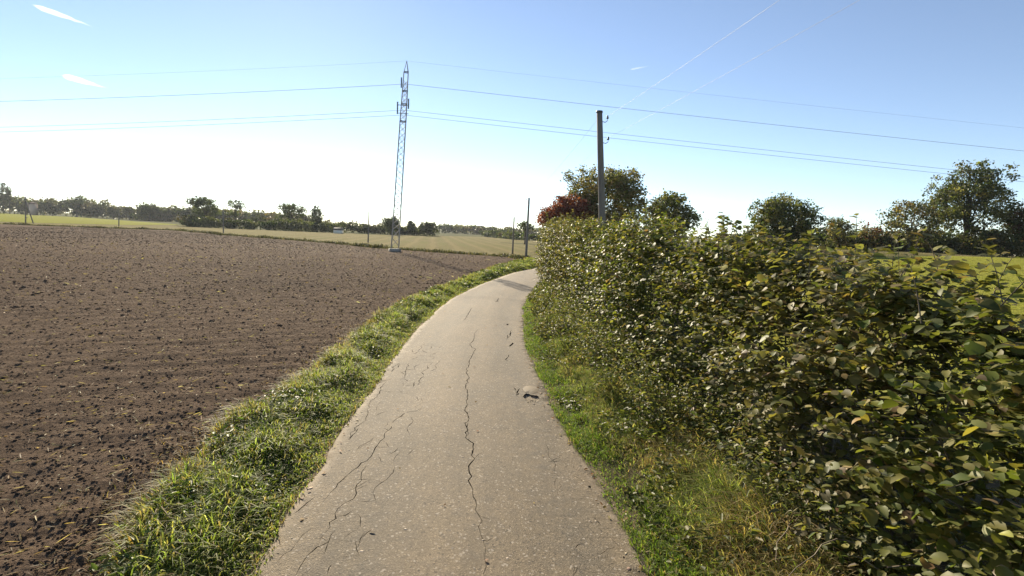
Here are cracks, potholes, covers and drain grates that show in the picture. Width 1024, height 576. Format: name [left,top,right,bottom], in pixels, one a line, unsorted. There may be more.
crack [278,365,422,576]
crack [464,332,489,575]
pothole [523,393,539,404]
